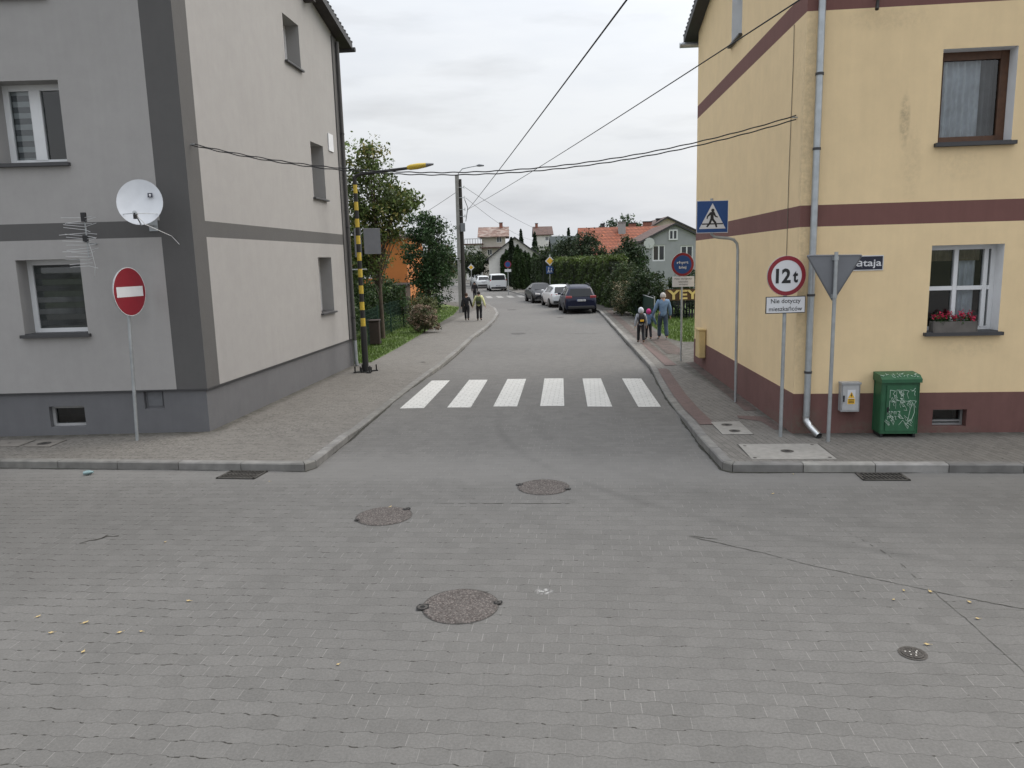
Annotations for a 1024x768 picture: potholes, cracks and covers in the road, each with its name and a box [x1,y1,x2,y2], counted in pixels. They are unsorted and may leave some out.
manhole cover [711,421,754,435]
manhole cover [737,444,836,459]
manhole cover [416,589,502,624]
drain grate [216,470,268,479]
manhole cover [898,646,928,660]
drain grate [855,472,911,481]
crack [689,536,1024,609]
manhole cover [355,507,412,526]
manhole cover [516,479,571,495]
